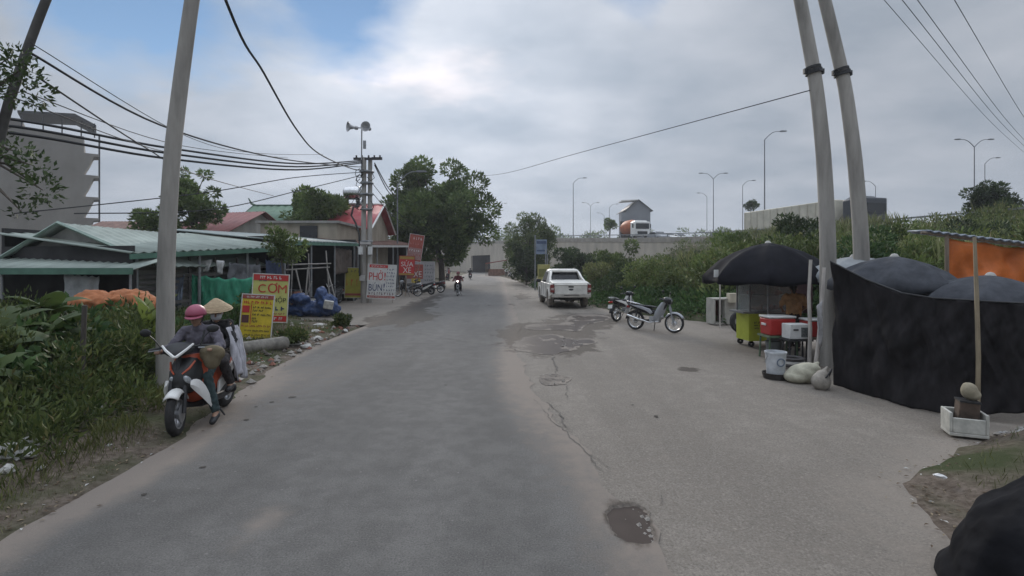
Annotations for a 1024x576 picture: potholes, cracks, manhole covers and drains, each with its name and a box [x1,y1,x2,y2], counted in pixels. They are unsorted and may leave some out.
pothole [539,374,571,386]
pothole [604,503,656,544]
crack [535,356,611,473]
